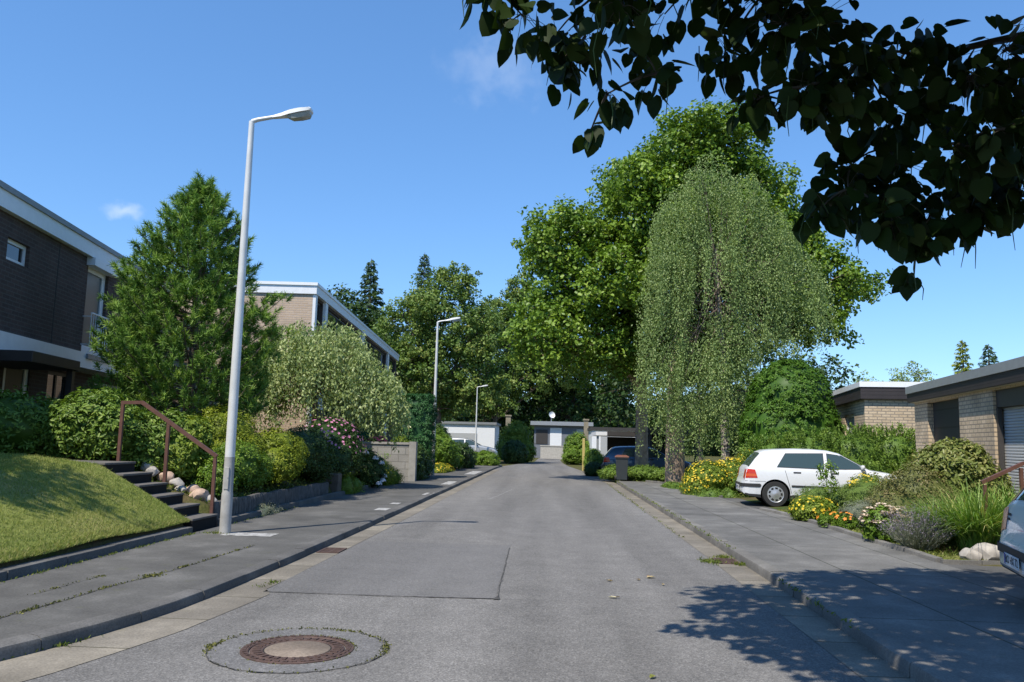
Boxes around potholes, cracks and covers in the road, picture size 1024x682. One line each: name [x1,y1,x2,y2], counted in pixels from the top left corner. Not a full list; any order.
manhole cover [239,635,354,664]
